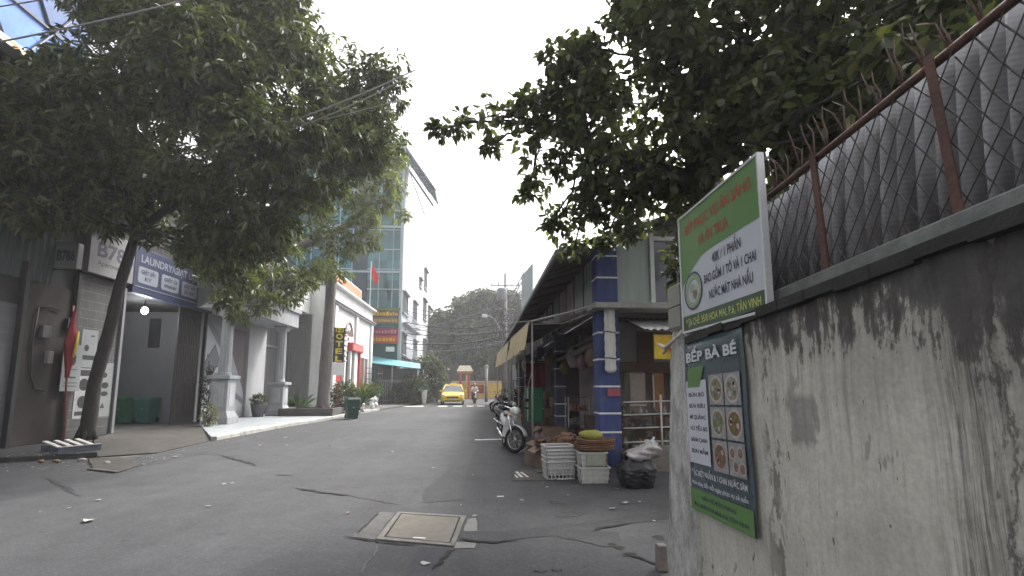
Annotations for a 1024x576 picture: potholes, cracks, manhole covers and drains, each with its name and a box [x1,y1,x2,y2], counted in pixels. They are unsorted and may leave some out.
manhole cover [376,511,466,547]
crack [344,535,513,575]
crack [274,474,398,505]
